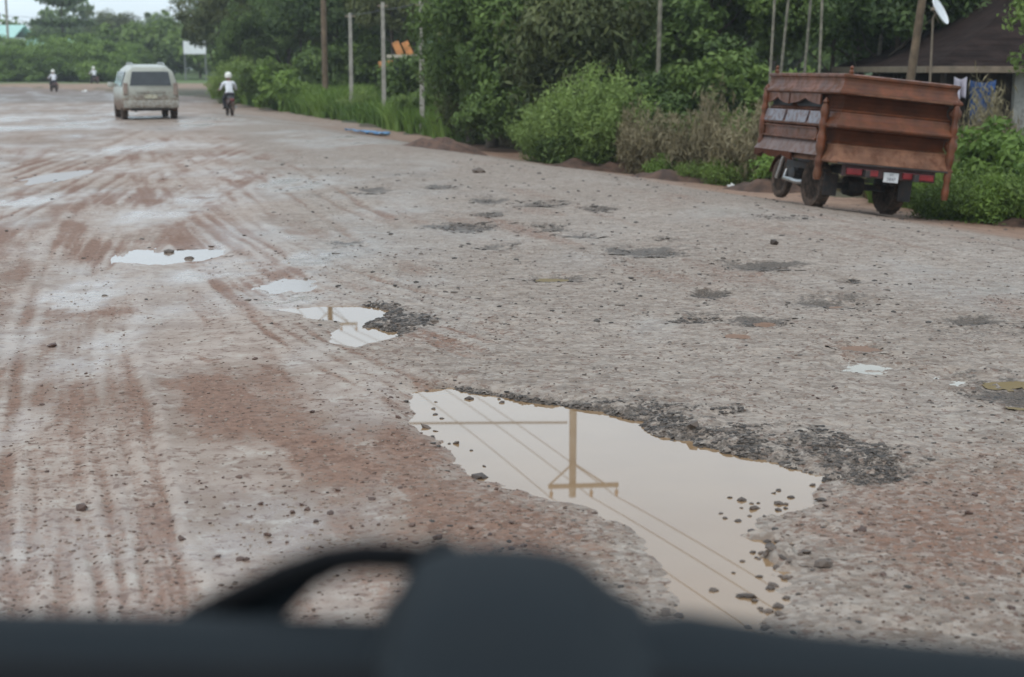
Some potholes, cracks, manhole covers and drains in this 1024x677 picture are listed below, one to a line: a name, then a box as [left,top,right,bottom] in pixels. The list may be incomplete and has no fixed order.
pothole [408,387,930,622]
pothole [346,187,400,195]
pothole [412,219,526,234]
pothole [511,197,565,208]
pothole [708,258,839,276]
pothole [570,244,697,261]
pothole [685,286,734,299]
pothole [937,311,1012,327]
pothole [277,300,466,347]
pothole [723,312,804,333]
